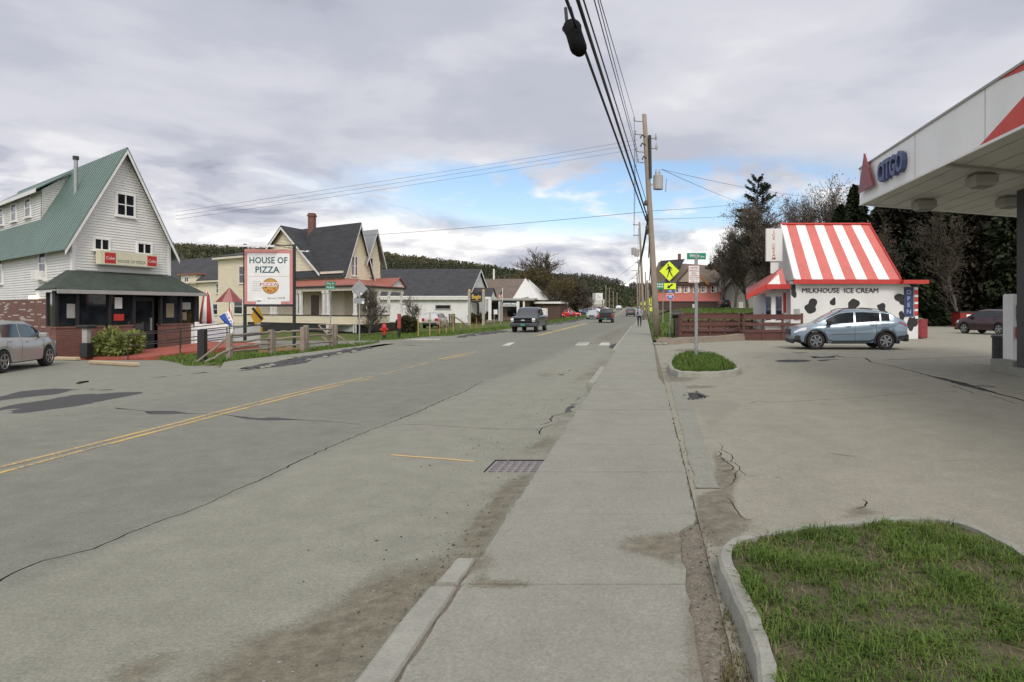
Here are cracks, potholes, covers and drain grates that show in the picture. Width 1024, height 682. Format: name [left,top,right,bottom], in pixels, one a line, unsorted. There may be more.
pothole [679,390,709,400]
crack [719,445,750,520]
drain grate [484,460,544,472]
crack [0,386,474,581]
